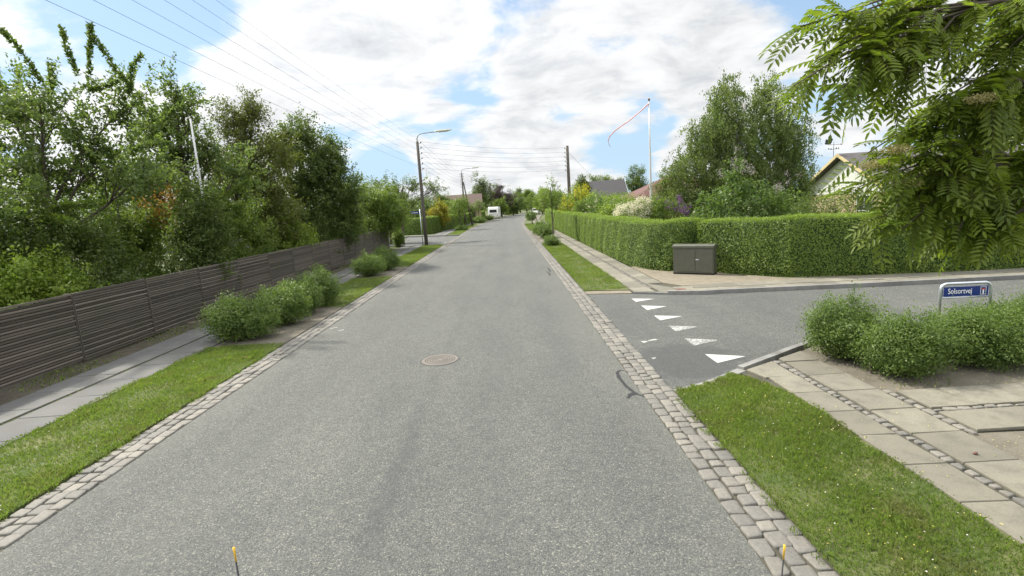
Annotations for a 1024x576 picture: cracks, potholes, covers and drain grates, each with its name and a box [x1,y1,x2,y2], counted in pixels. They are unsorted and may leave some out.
manhole cover [420,354,460,366]
